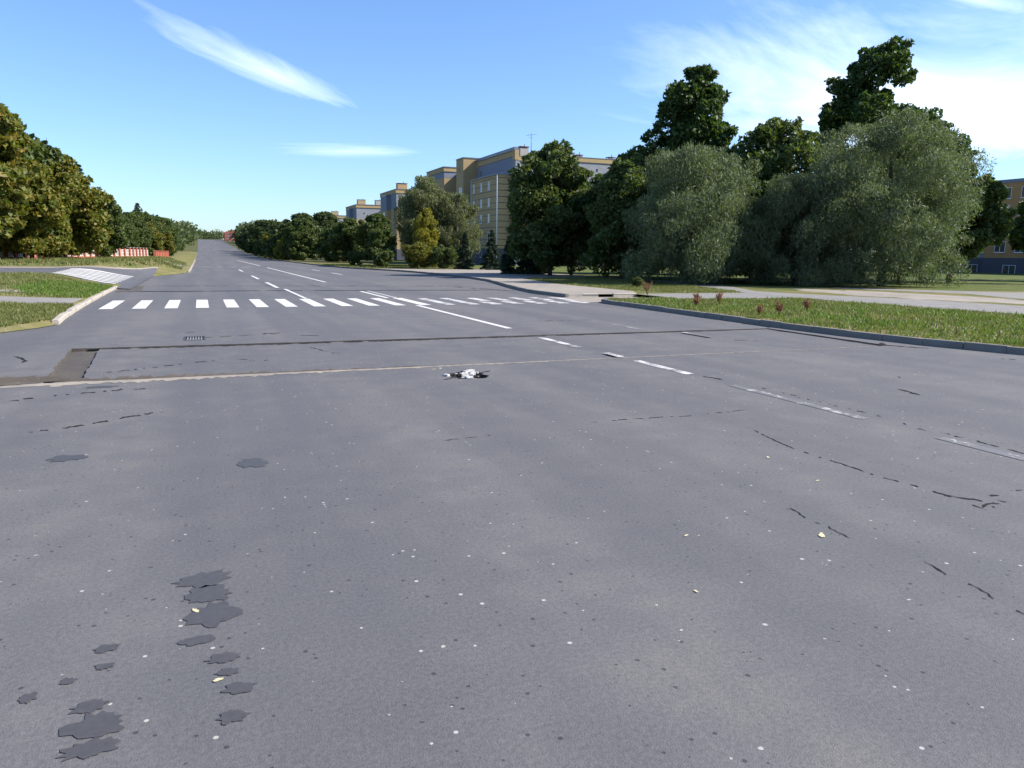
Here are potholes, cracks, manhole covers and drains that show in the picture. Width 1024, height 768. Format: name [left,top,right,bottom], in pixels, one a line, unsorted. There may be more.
crack [12,388,146,401]
crack [40,412,154,431]
crack [754,430,1023,510]
